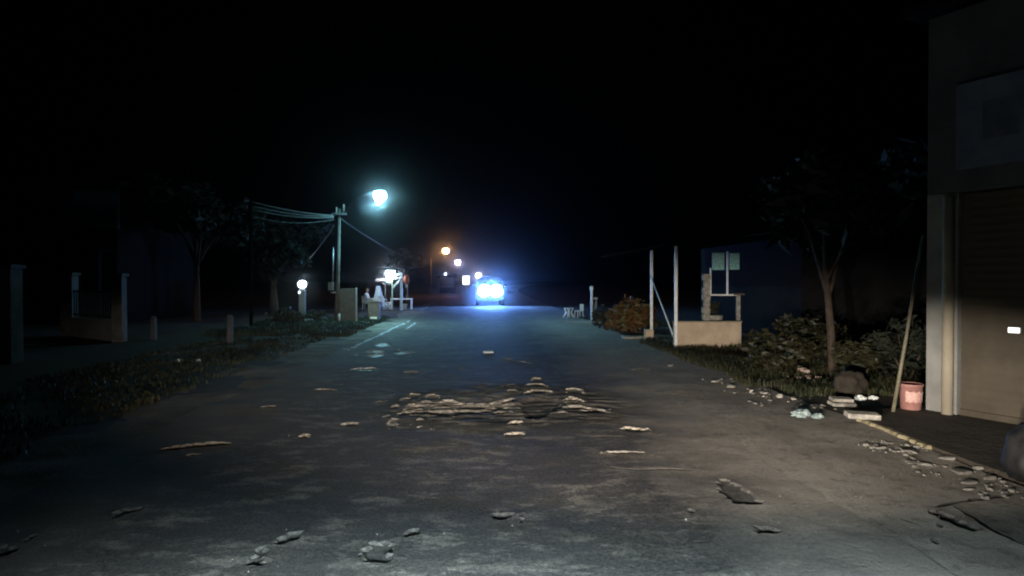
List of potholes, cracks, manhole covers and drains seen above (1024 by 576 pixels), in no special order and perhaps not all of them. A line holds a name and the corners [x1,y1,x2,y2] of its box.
pothole [397,398,516,418]
pothole [518,397,563,420]
pothole [563,405,610,414]
pothole [714,479,766,505]
crack [901,493,1024,545]
pothole [751,525,781,534]
